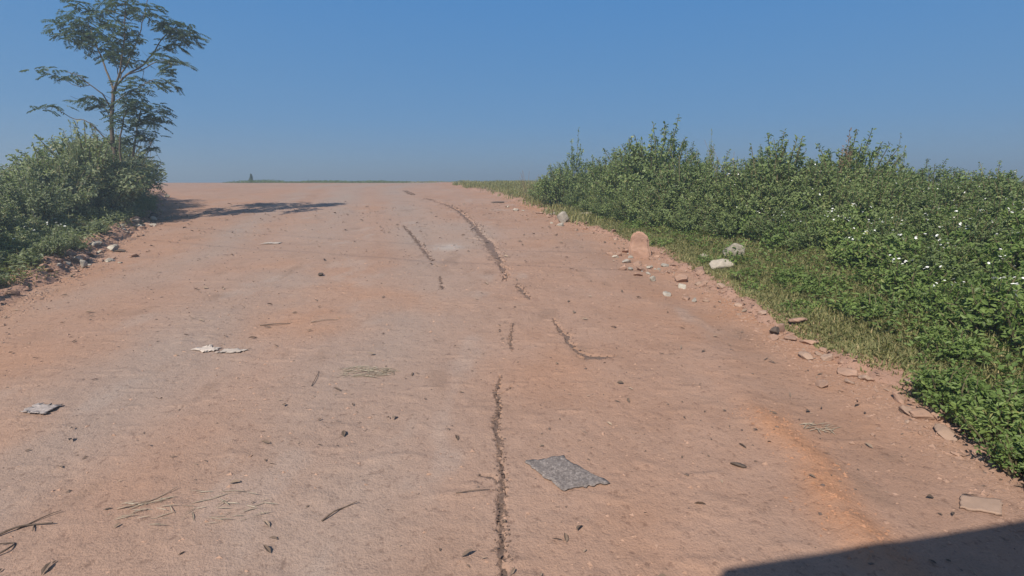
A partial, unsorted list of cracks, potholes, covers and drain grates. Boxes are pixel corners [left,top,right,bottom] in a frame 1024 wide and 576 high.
crack [481,375,516,576]
crack [551,318,615,359]
crack [403,190,531,300]
